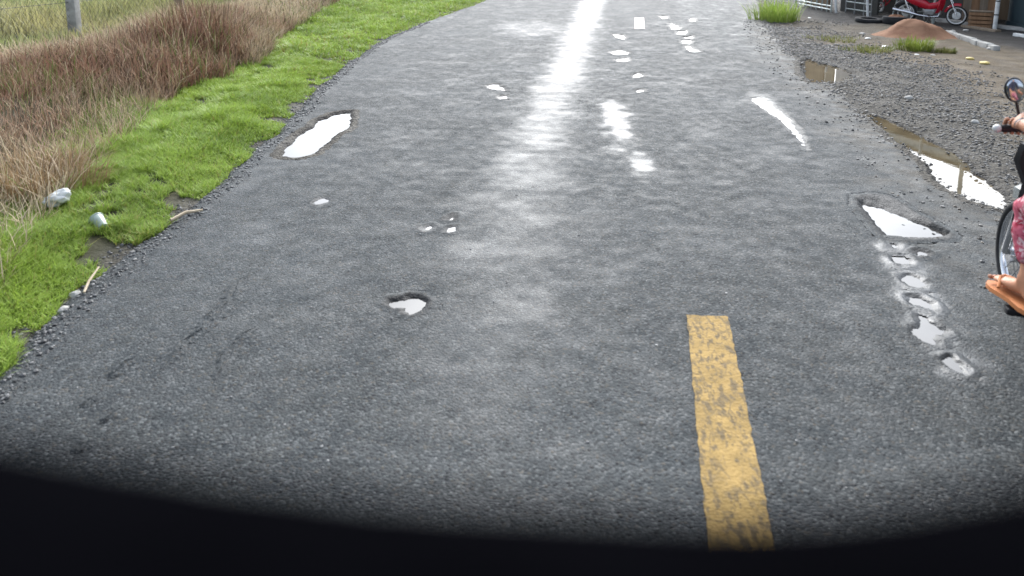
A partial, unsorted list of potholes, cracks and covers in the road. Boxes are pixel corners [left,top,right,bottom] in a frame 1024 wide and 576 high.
pothole [792,56,864,85]
pothole [373,290,439,321]
pothole [904,245,942,261]
pothole [886,270,942,294]
pothole [853,109,1017,213]
pothole [896,305,964,351]
pothole [892,290,952,320]
pothole [848,192,963,245]
pothole [876,248,926,271]
pothole [268,109,361,160]
